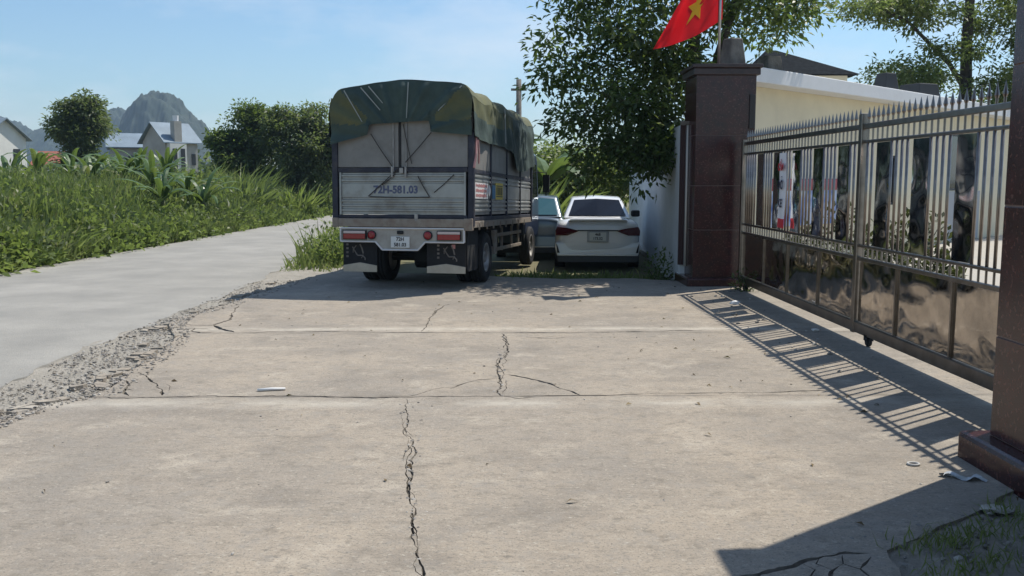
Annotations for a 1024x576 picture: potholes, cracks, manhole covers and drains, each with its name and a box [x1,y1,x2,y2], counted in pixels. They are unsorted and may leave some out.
crack [108,305,824,576]
crack [742,551,871,576]
